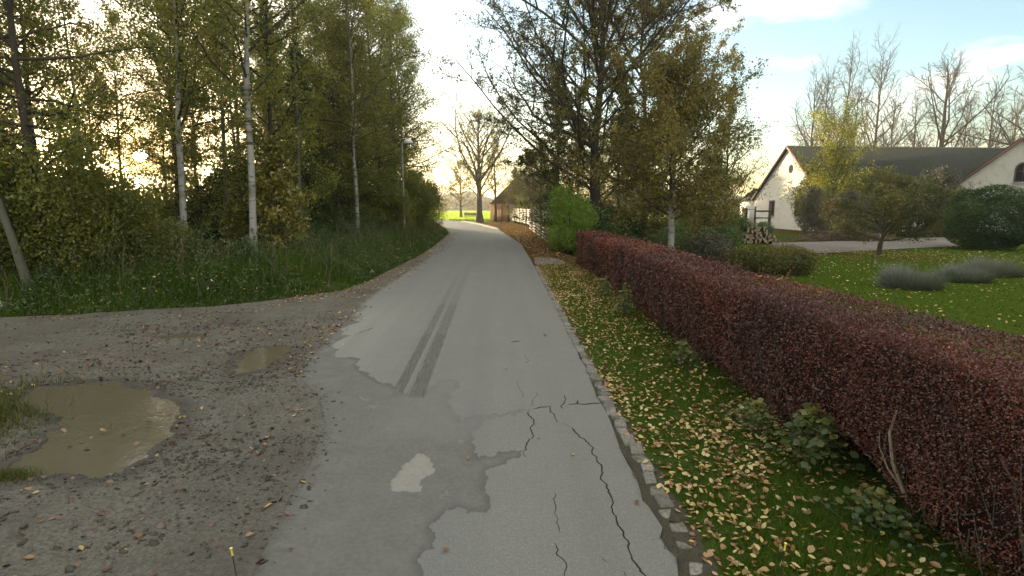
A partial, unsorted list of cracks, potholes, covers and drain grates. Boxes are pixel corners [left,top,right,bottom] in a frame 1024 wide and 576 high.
crack [517,384,655,576]
pothole [7,380,182,480]
pothole [232,345,295,375]
